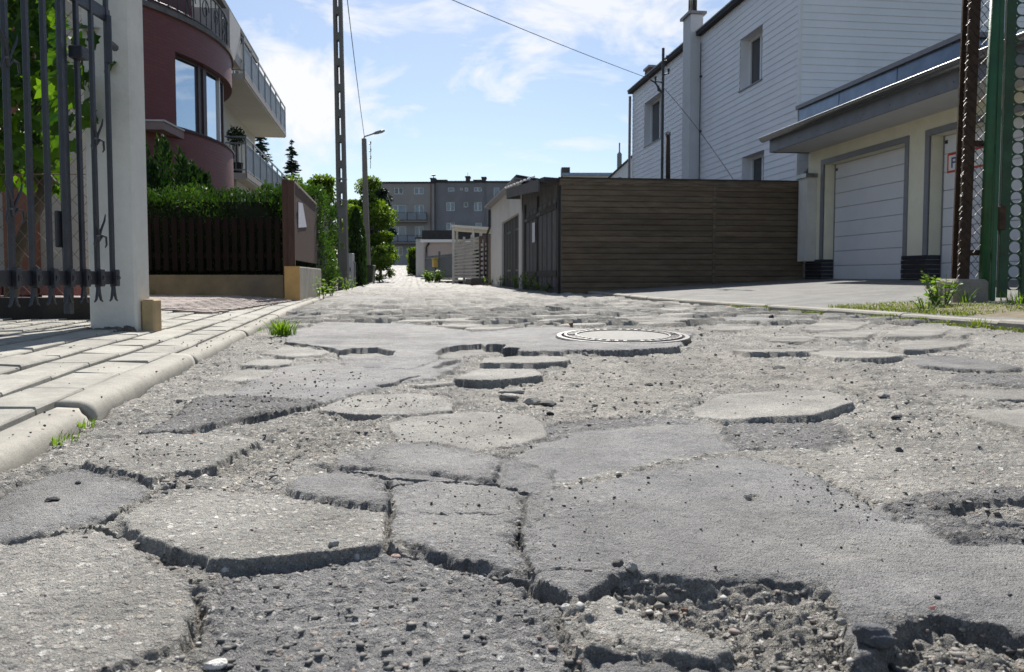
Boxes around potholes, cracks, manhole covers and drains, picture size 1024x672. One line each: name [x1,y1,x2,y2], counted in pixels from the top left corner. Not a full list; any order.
pothole [864,613,1024,672]
crack [31,463,177,541]
crack [281,342,340,356]
pothole [947,496,1024,521]
crack [377,375,421,388]
pothole [611,578,863,672]
crack [340,471,620,672]
manhole cover [556,328,691,345]
